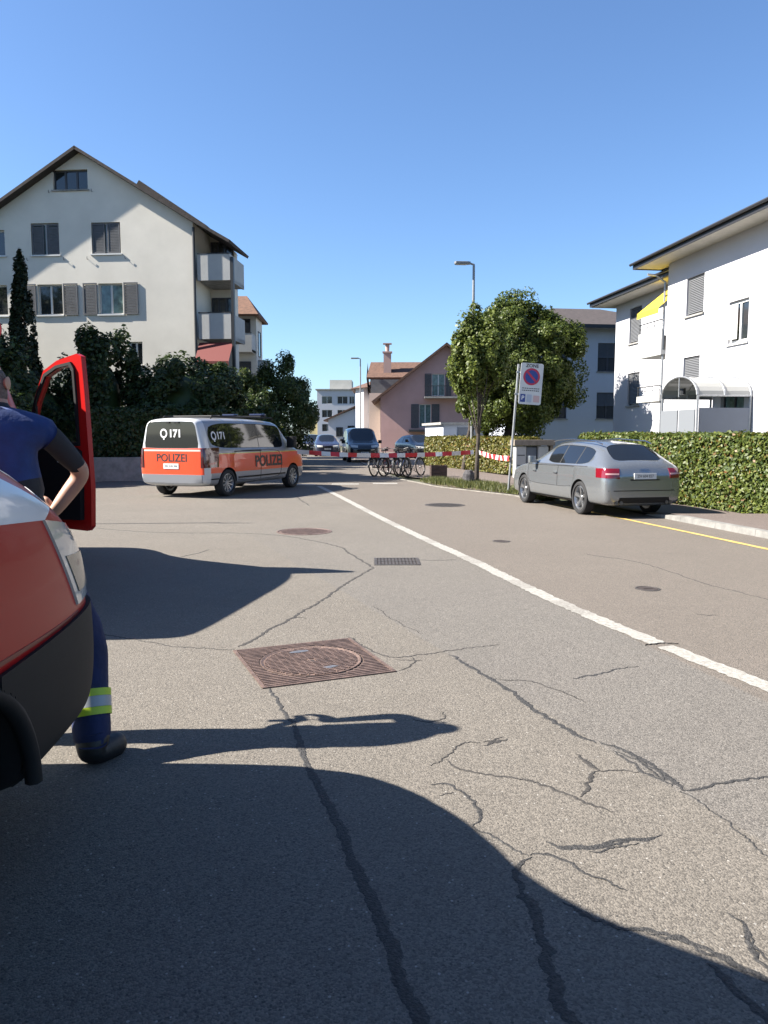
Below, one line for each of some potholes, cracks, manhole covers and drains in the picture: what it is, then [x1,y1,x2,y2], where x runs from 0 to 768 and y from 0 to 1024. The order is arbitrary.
manhole cover [233,638,396,689]
crack [495,678,584,702]
crack [431,737,768,1024]
